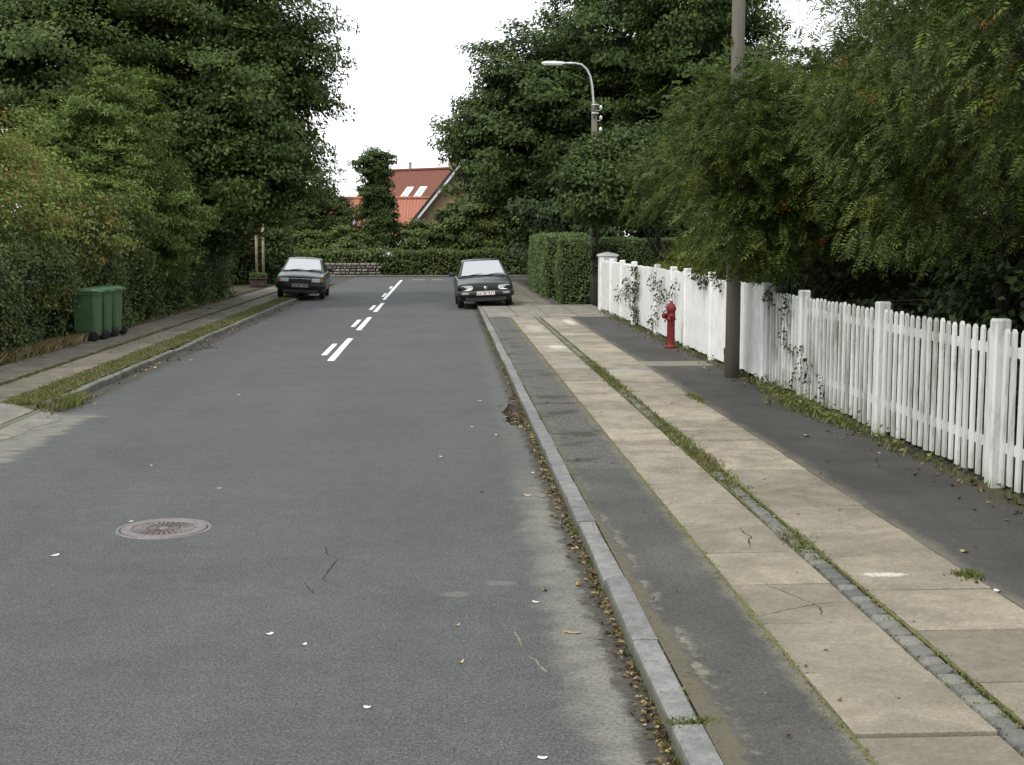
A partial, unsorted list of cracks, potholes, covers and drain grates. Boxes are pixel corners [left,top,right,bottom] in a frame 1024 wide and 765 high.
crack [763,585,832,616]
crack [305,546,338,595]
manhole cover [115,518,212,539]
pothole [502,403,524,426]
